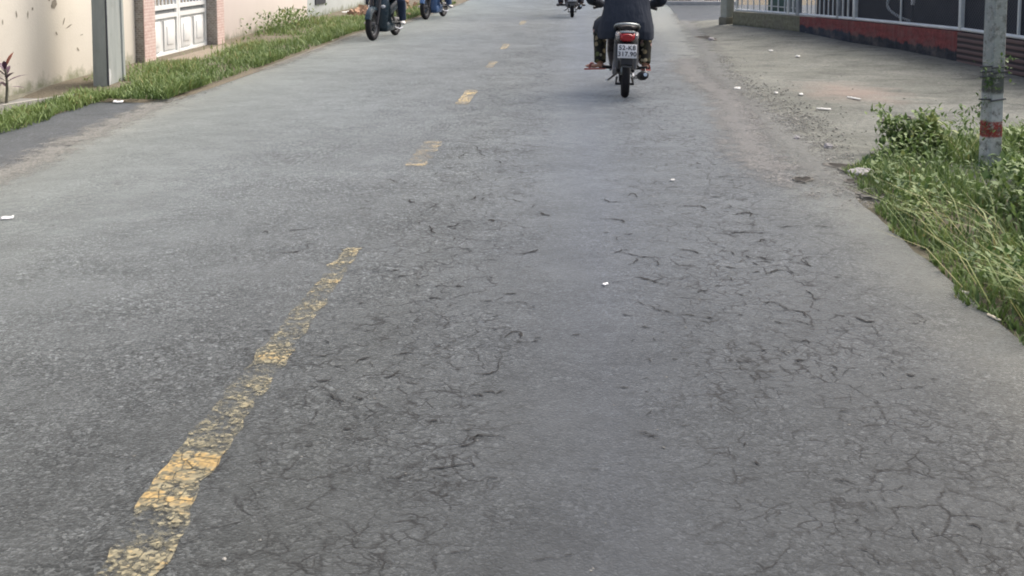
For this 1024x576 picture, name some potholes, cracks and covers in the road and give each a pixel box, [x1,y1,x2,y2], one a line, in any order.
crack [386,463,498,478]
crack [311,340,437,443]
crack [684,176,938,411]
crack [461,277,540,446]
crack [601,186,666,285]
crack [837,478,983,564]
